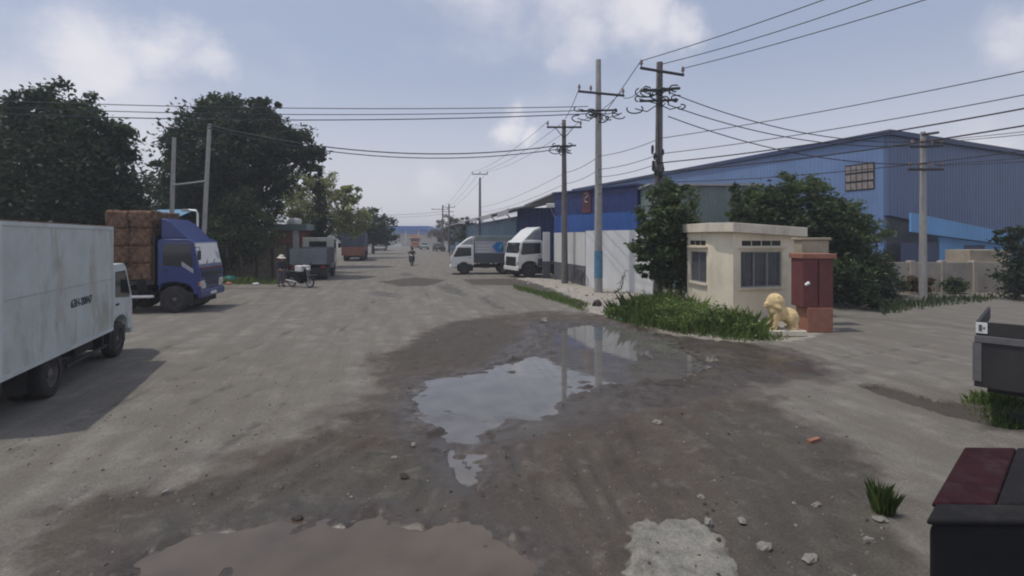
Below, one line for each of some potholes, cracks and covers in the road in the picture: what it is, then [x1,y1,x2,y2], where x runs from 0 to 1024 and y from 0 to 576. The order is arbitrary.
pothole [105,502,547,576]
pothole [407,323,725,492]
